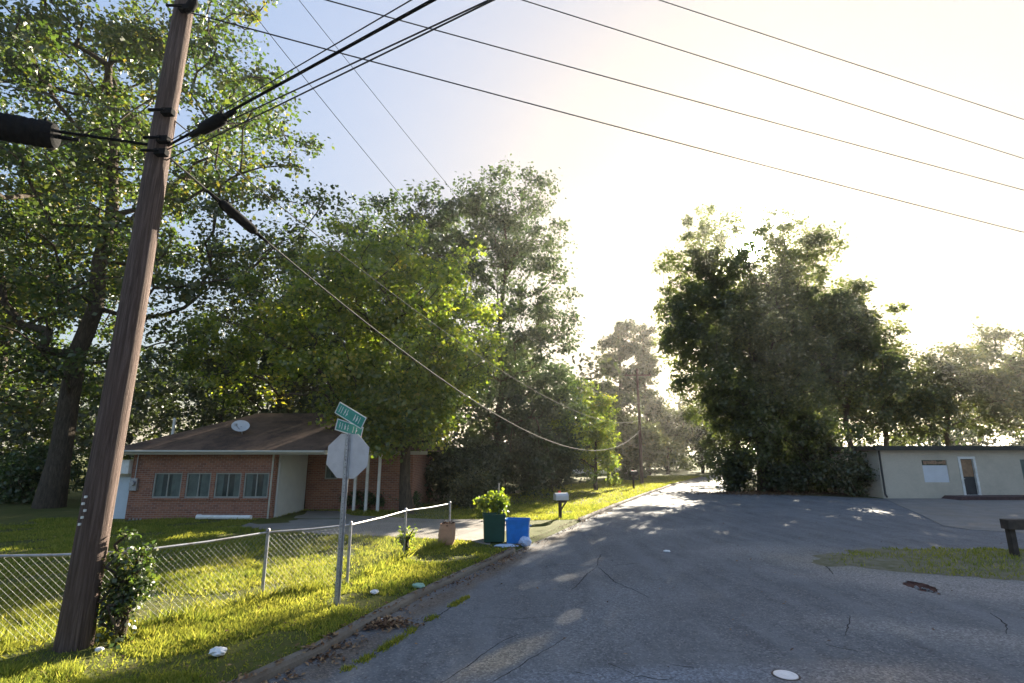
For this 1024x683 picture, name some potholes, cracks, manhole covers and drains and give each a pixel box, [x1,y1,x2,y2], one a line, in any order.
pothole [903,581,941,594]
manhole cover [771,669,801,681]
crack [441,616,568,683]
crack [574,555,649,598]
